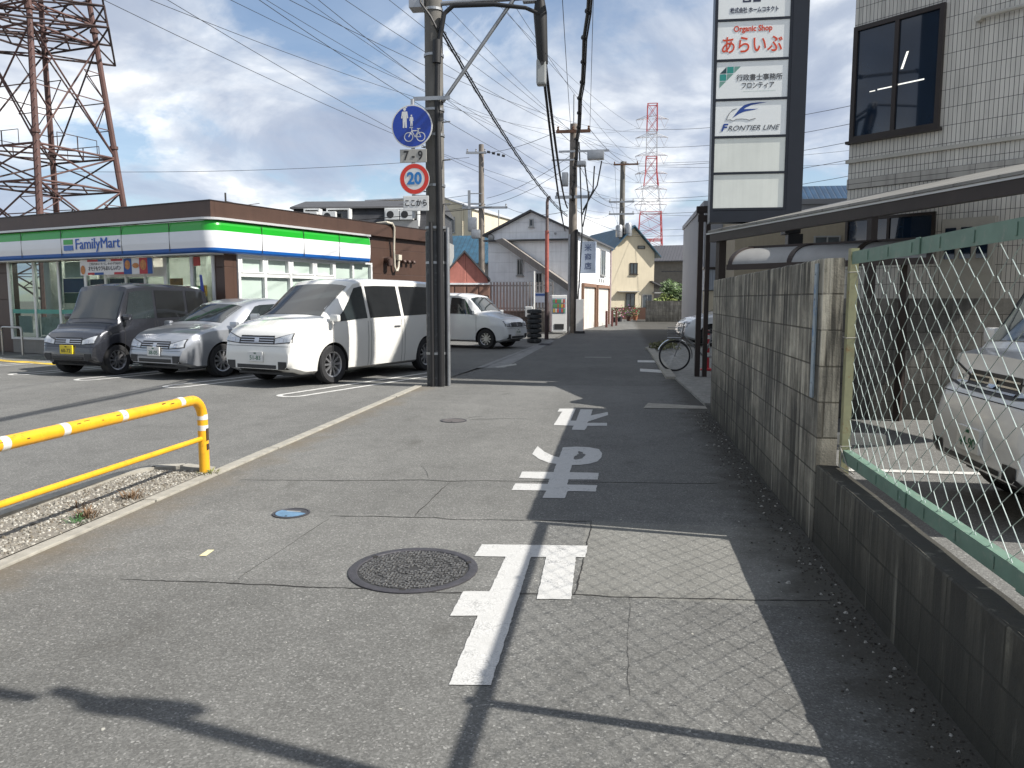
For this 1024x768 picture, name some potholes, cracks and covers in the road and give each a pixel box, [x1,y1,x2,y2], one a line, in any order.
manhole cover [348,548,478,594]
manhole cover [272,508,310,519]
